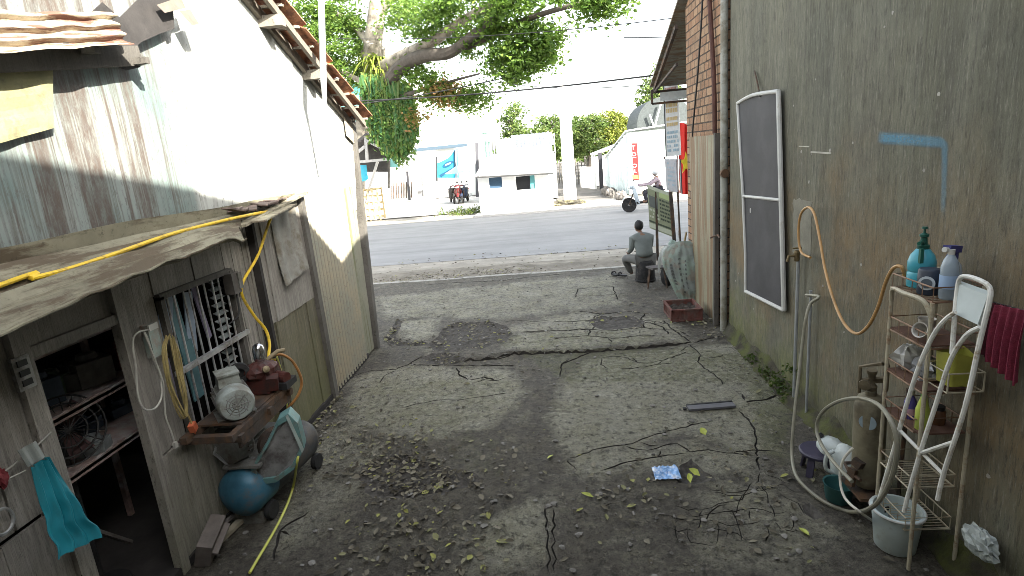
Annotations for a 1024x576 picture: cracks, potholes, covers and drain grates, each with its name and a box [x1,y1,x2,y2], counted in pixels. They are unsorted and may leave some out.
crack [351,294,726,408]
pothole [429,321,513,352]
crack [567,394,804,548]
pothole [589,316,645,330]
